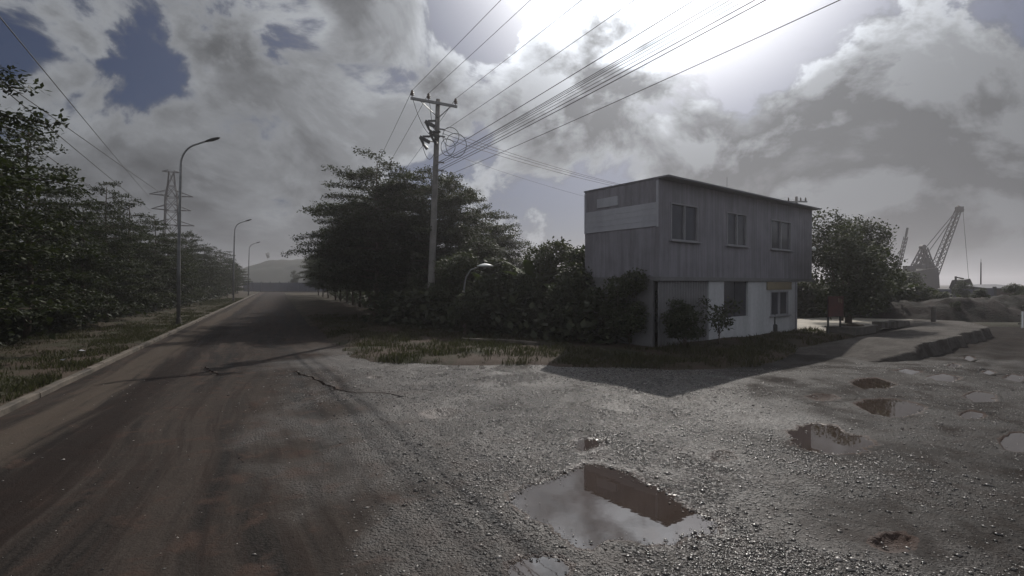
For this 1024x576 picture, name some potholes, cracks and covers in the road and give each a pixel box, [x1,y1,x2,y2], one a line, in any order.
pothole [844,397,936,420]
pothole [987,430,1024,455]
crack [291,371,403,397]
pothole [855,527,933,559]
pothole [920,373,968,383]
crack [200,366,244,376]
pothole [495,459,735,554]
pothole [486,547,589,576]
pothole [843,377,905,390]
pothole [998,373,1024,383]
pothole [950,409,995,421]
pothole [564,435,611,456]
